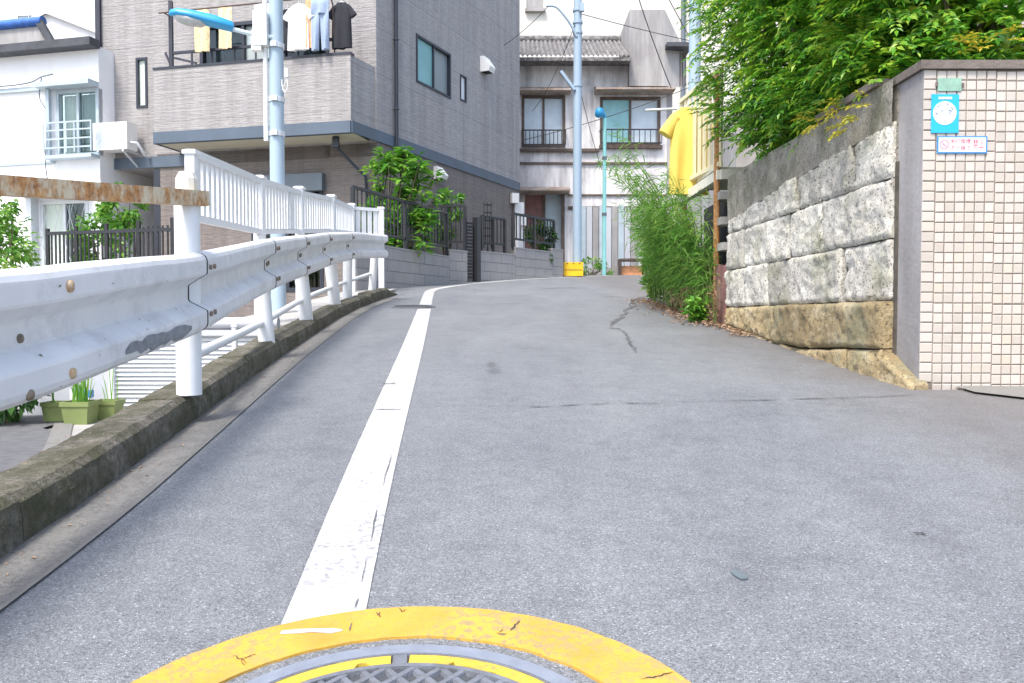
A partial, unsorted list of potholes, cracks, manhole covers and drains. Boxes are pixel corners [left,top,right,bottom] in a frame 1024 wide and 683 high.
crack [605,296,644,353]
manhole cover [245,644,575,683]
